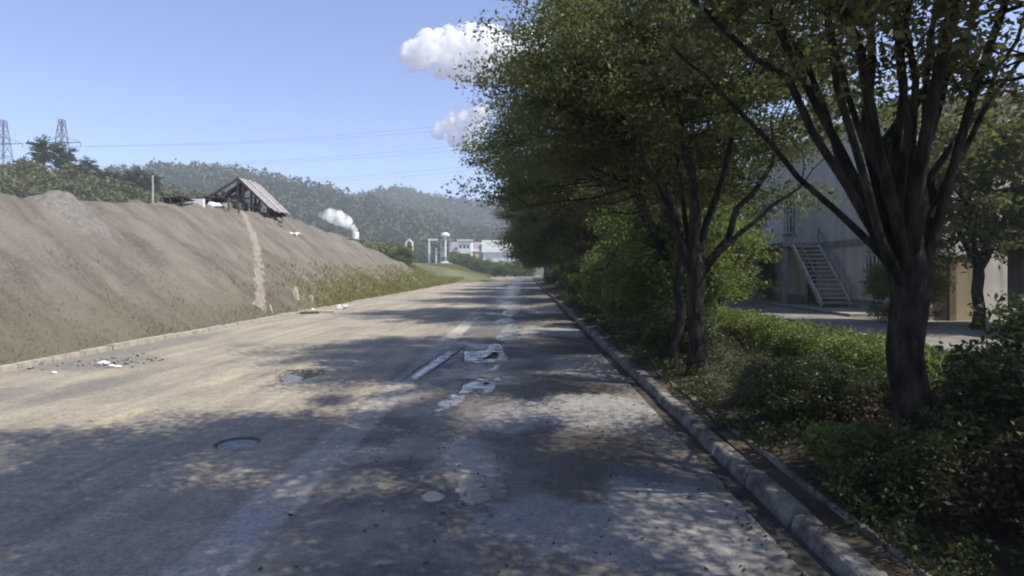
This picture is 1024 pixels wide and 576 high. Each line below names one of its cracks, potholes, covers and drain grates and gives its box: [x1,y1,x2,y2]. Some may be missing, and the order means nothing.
manhole cover [212,437,261,449]
pothole [275,369,326,382]
